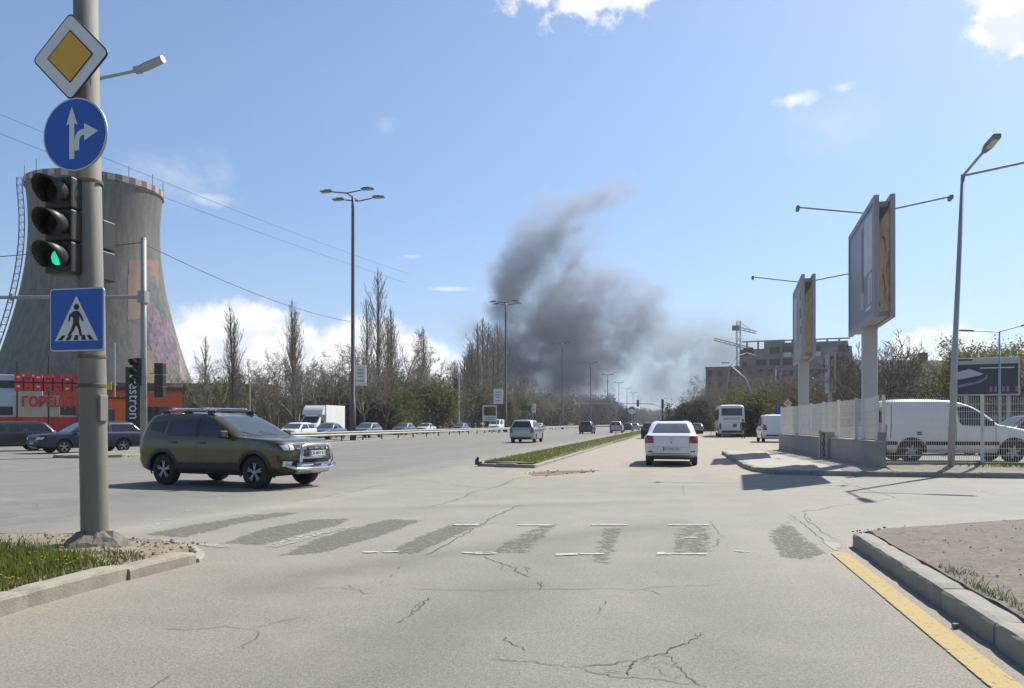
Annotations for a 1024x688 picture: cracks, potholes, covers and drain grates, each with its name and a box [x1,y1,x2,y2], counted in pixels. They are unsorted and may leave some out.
crack [429,505,525,554]
crack [397,557,726,623]
crack [502,634,706,687]
